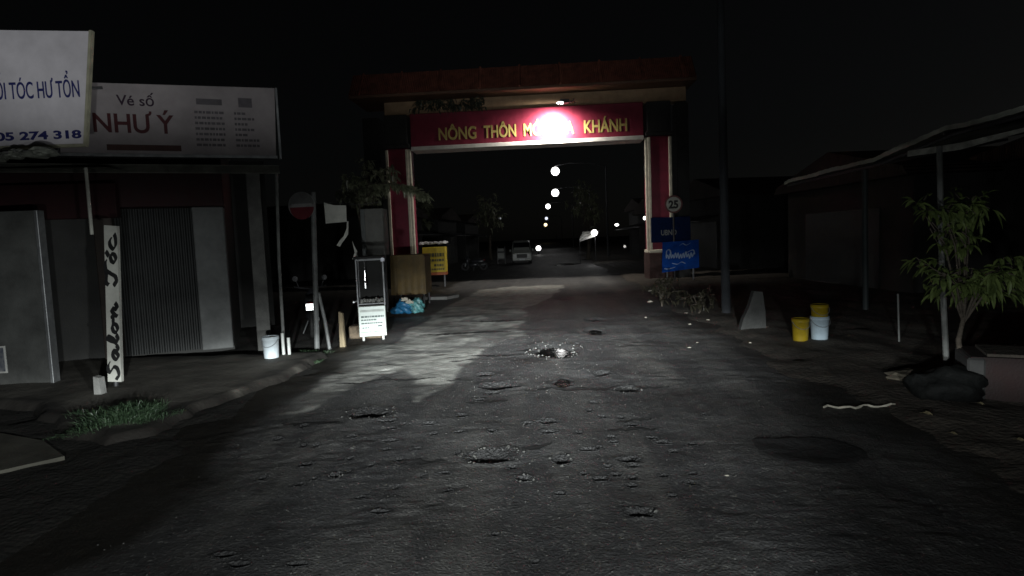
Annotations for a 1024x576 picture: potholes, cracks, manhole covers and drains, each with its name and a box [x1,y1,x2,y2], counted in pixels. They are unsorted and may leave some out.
pothole [533,417,562,425]
pothole [525,341,582,359]
pothole [582,327,607,335]
pothole [514,473,535,482]
pothole [341,406,397,420]
pothole [549,453,574,467]
pothole [460,445,525,464]
pothole [622,506,658,518]
pothole [550,377,575,388]
pothole [474,381,521,391]
